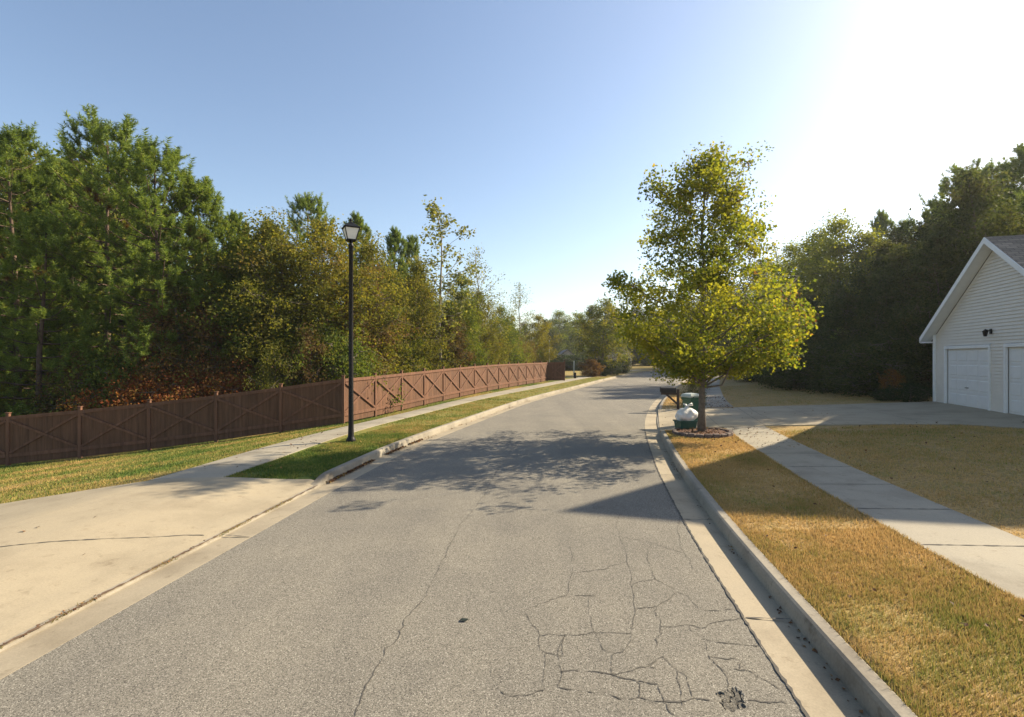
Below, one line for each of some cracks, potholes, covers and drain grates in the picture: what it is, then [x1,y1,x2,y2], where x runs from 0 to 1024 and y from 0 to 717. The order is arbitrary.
pothole [703,680,764,717]
crack [354,466,501,717]
crack [489,431,810,717]
